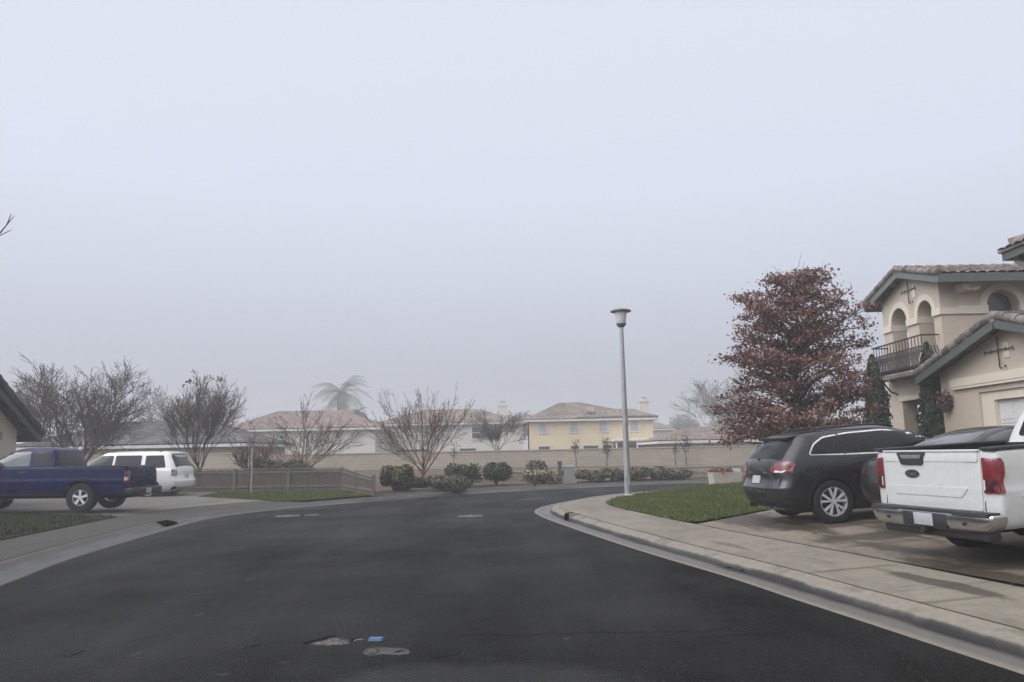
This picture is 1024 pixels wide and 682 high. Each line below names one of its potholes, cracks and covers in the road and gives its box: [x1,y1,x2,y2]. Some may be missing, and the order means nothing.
pothole [302,635,365,646]
manhole cover [362,646,411,656]
